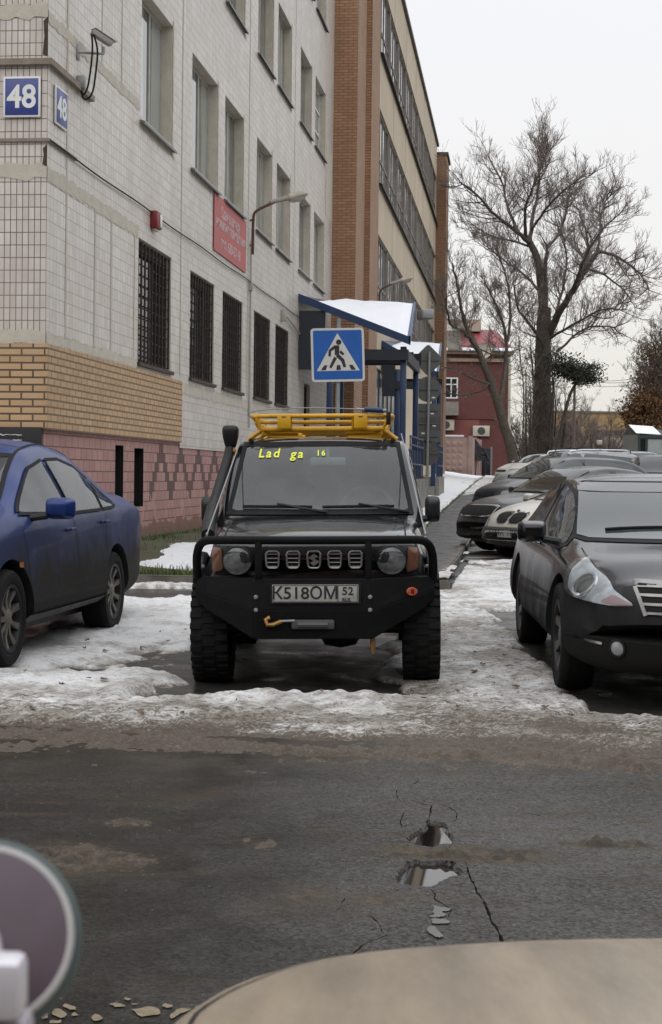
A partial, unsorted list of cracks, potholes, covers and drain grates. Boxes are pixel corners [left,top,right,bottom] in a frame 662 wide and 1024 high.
crack [396,780,457,827]
crack [431,862,504,942]
pothole [406,819,454,848]
crack [353,915,387,953]
pothole [391,859,464,889]
